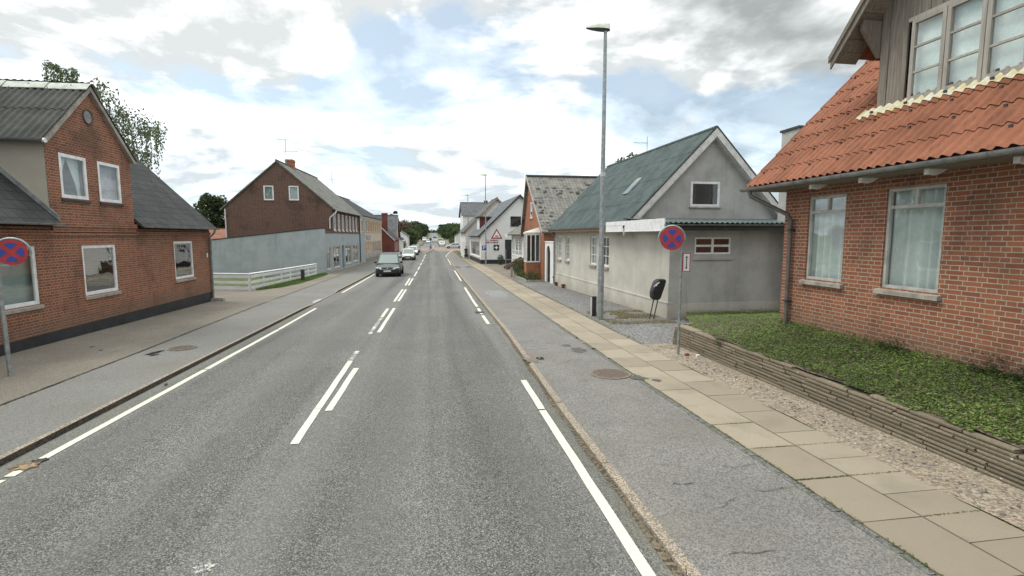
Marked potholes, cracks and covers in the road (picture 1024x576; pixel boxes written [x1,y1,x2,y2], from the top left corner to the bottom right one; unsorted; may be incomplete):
manhole cover [590,368,631,379]
